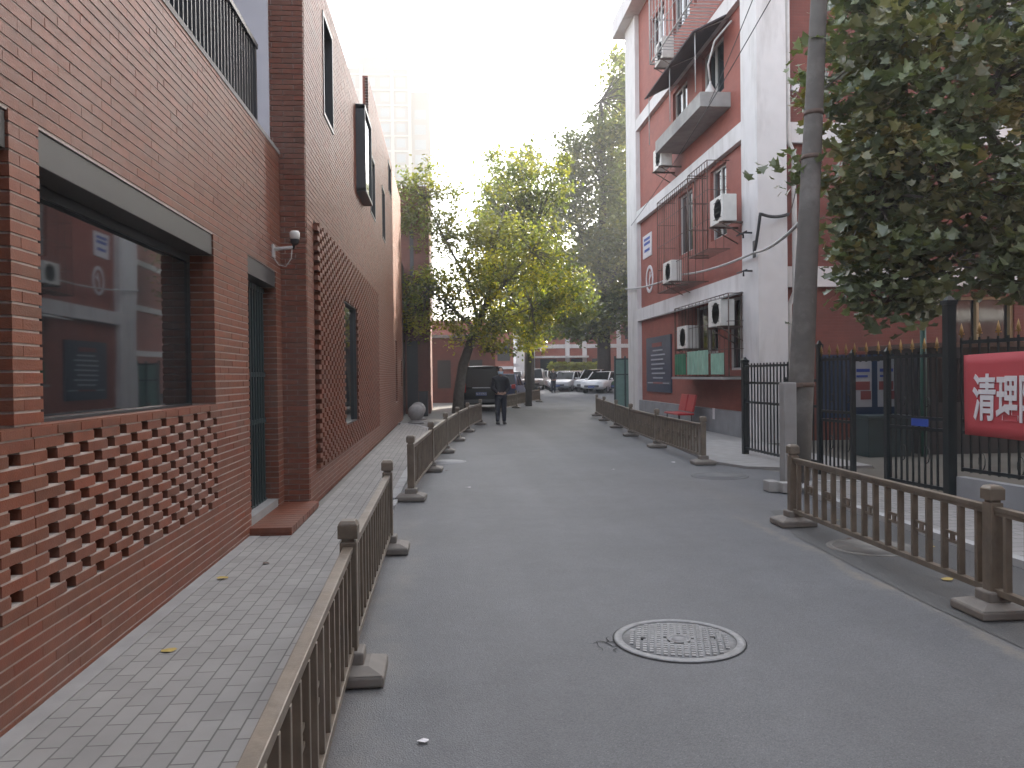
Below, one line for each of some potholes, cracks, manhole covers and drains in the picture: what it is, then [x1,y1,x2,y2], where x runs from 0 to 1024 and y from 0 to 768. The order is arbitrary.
manhole cover [612,619,747,663]
manhole cover [826,538,920,557]
manhole cover [691,472,749,480]
